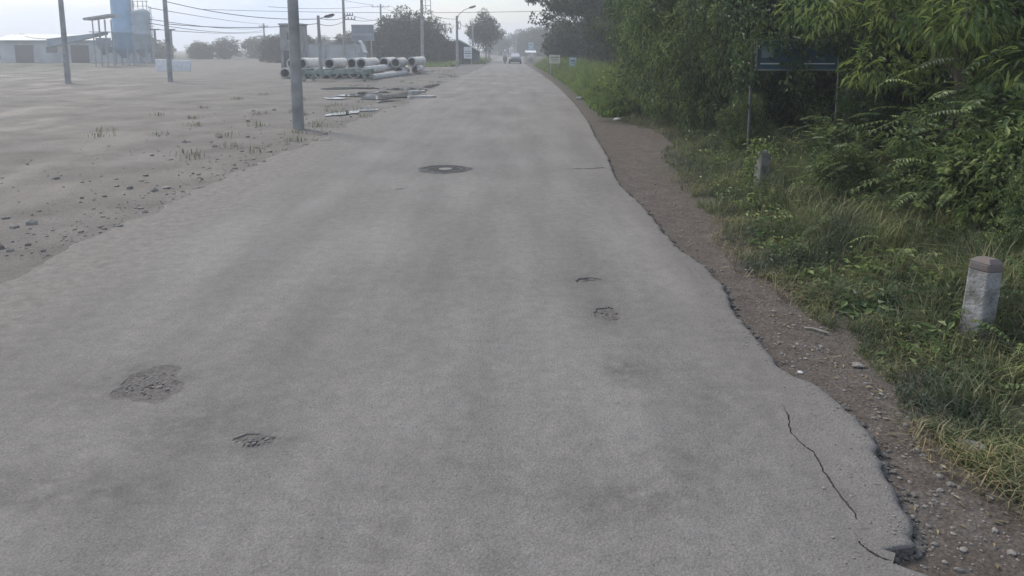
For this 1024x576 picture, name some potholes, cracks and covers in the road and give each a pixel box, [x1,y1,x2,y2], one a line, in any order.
pothole [588,304,626,325]
crack [775,404,895,567]
pothole [225,431,287,451]
pothole [102,362,192,406]
manhole cover [418,165,473,174]
